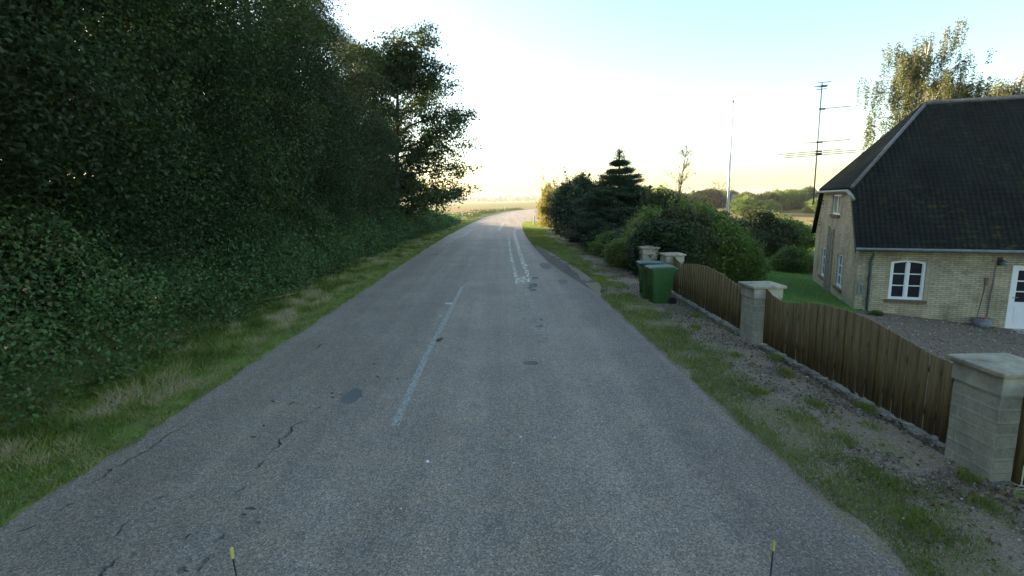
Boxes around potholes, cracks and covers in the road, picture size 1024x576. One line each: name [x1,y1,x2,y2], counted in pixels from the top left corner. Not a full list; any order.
crack [235,402,321,493]
crack [86,423,189,486]
crack [97,558,118,576]
crack [110,518,157,540]
